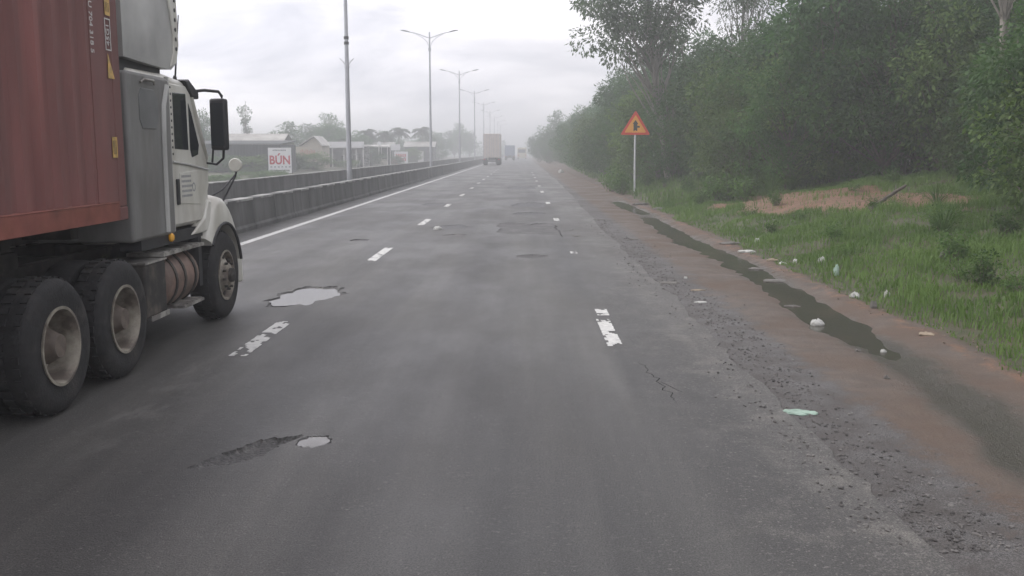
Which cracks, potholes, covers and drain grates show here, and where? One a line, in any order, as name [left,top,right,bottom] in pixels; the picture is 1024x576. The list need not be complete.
pothole [496,222,562,235]
pothole [264,286,348,307]
pothole [187,434,304,470]
pothole [295,435,332,448]
